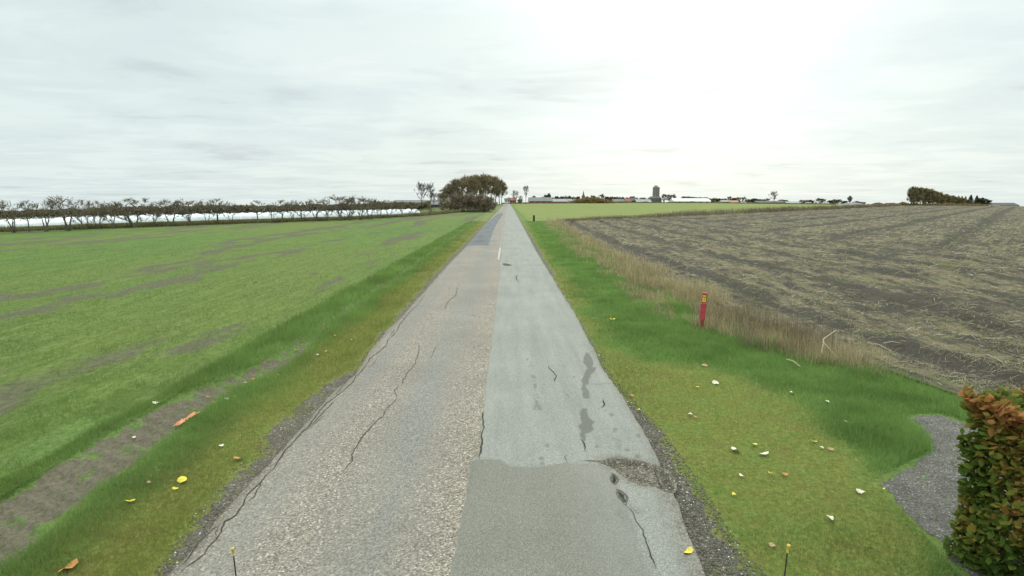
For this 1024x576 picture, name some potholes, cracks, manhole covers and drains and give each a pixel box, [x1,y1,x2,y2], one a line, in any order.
crack [176,295,425,570]
pothole [598,458,677,493]
crack [629,508,656,566]
